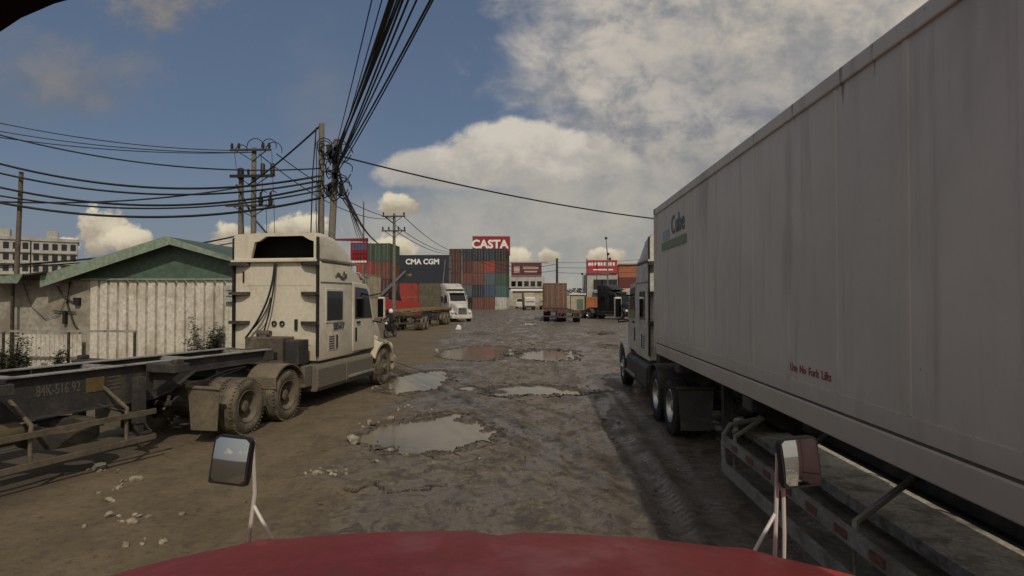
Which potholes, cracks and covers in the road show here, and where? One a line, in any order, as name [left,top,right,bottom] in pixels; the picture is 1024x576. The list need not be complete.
pothole [472,382,601,398]
crack [334,442,511,498]
pothole [346,409,525,460]
pothole [501,348,583,362]
pothole [369,368,464,396]
pothole [433,345,523,362]
